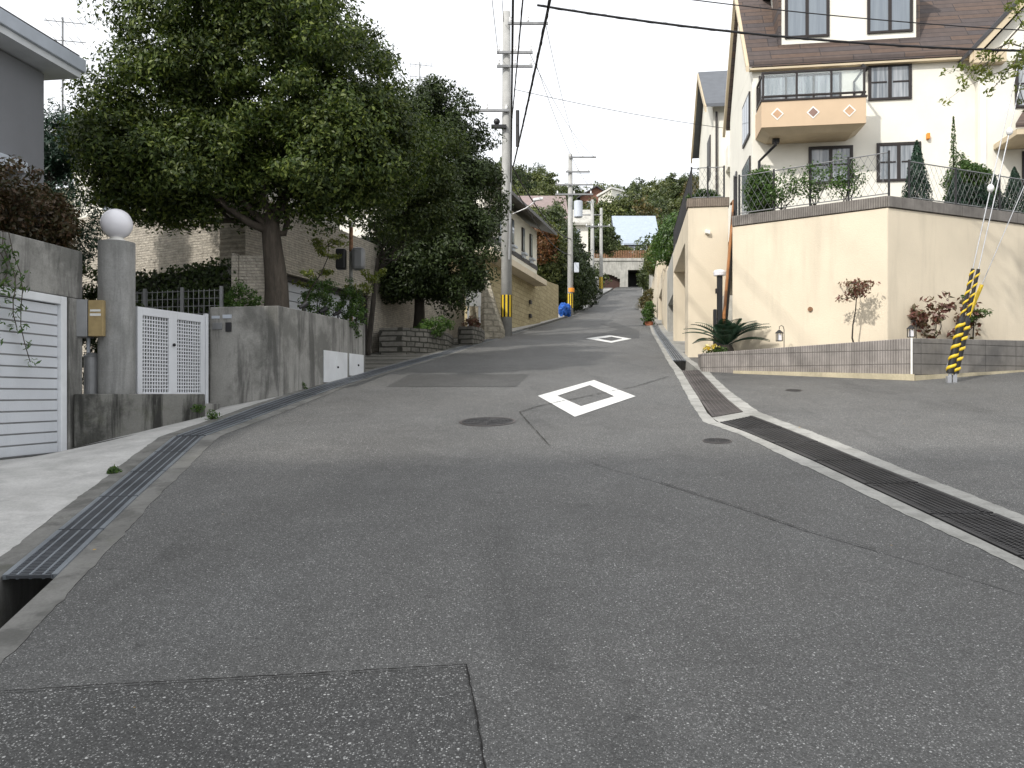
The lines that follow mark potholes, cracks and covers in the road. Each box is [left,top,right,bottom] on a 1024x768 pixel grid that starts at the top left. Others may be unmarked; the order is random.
drain grate [224,405,286,419]
drain grate [155,436,204,452]
drain grate [816,460,918,485]
drain grate [695,391,728,401]
drain grate [701,400,743,417]
drain grate [686,376,711,384]
drain grate [738,427,818,444]
drain grate [292,386,339,395]
drain grate [931,513,1024,558]
drain grate [320,378,365,386]
drain grate [59,496,137,530]
drain grate [99,471,165,497]
